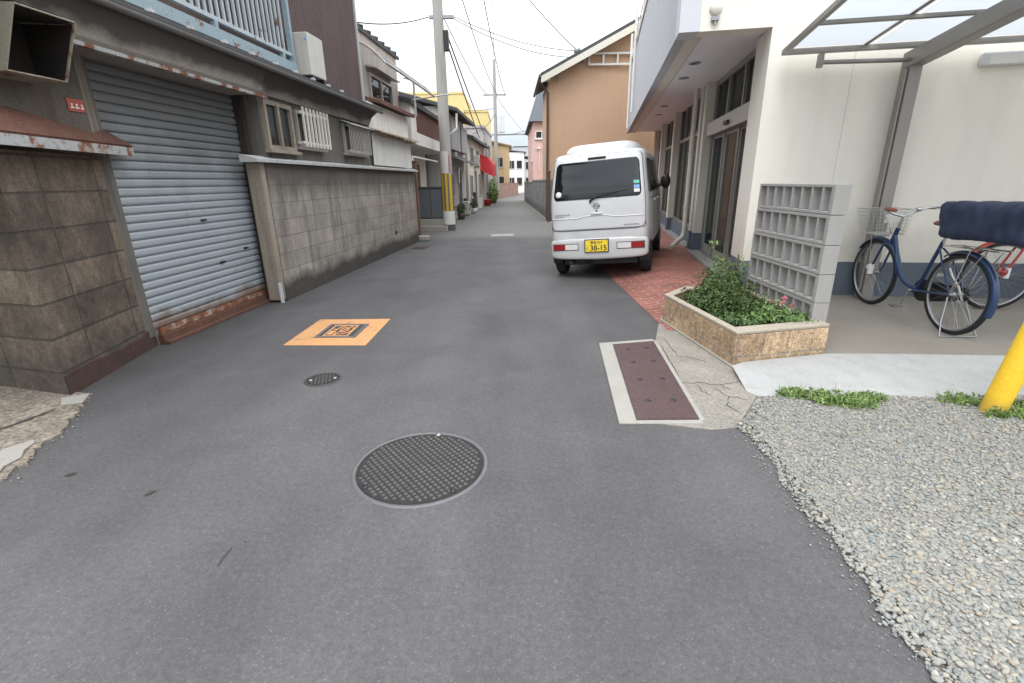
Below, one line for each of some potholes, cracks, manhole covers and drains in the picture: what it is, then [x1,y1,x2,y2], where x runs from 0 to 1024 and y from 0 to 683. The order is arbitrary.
utility cover [304,372,342,387]
crack [661,341,746,412]
manhole cover [351,432,488,509]
